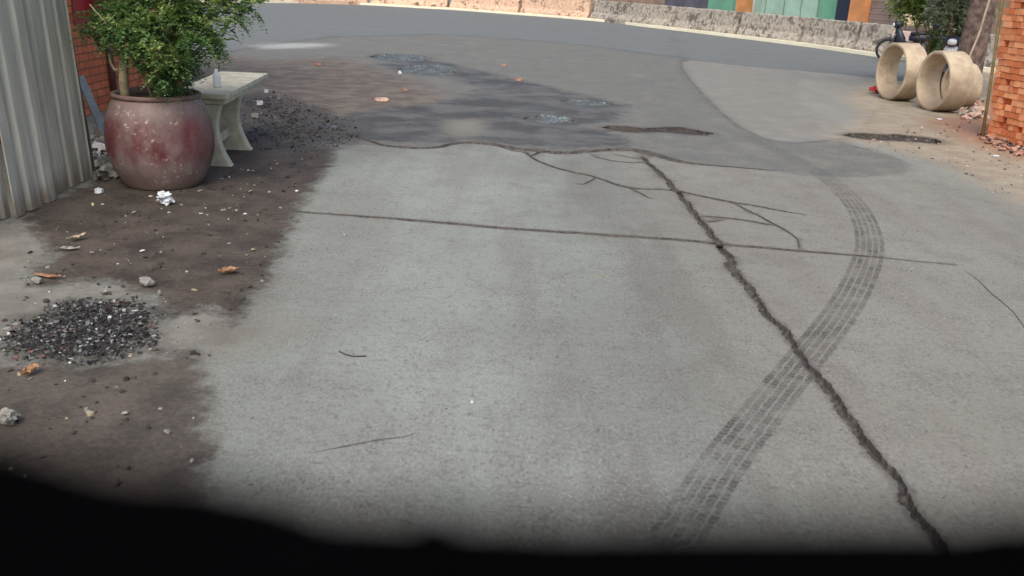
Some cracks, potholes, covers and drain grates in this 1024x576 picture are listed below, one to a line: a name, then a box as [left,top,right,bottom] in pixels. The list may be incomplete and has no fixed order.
pothole [370,54,429,62]
pothole [844,133,942,144]
crack [350,136,921,515]
pothole [524,114,574,123]
pothole [602,126,714,136]
pothole [400,65,457,75]
crack [311,433,415,453]
